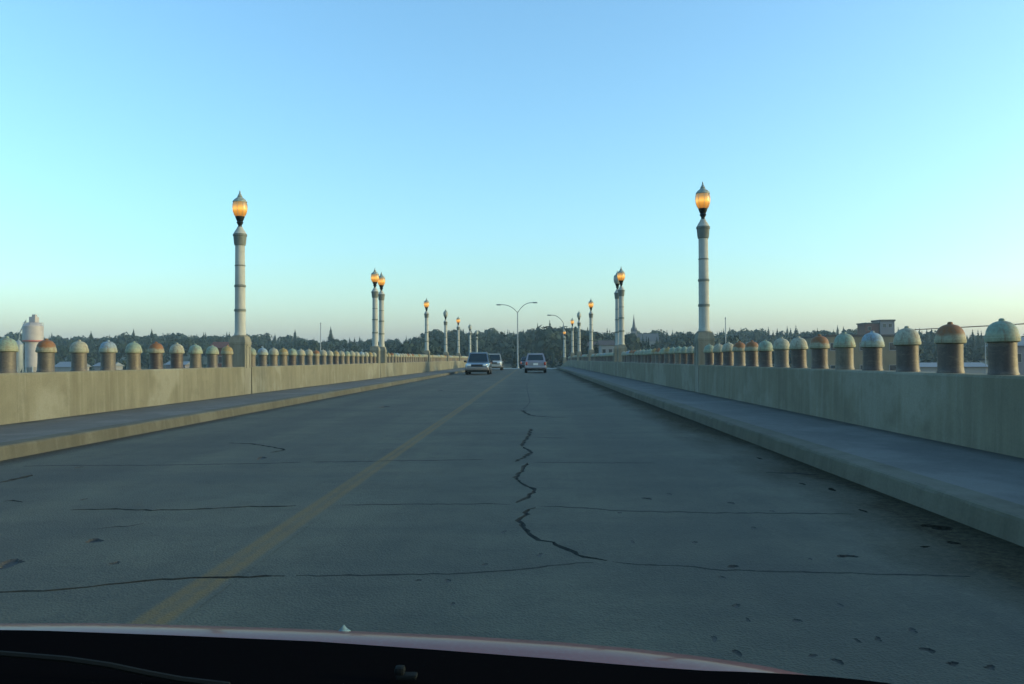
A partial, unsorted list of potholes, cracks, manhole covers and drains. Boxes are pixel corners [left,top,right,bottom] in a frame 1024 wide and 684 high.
pothole [0,558,25,570]
crack [296,379,971,577]
crack [0,575,272,593]
crack [0,443,296,483]
